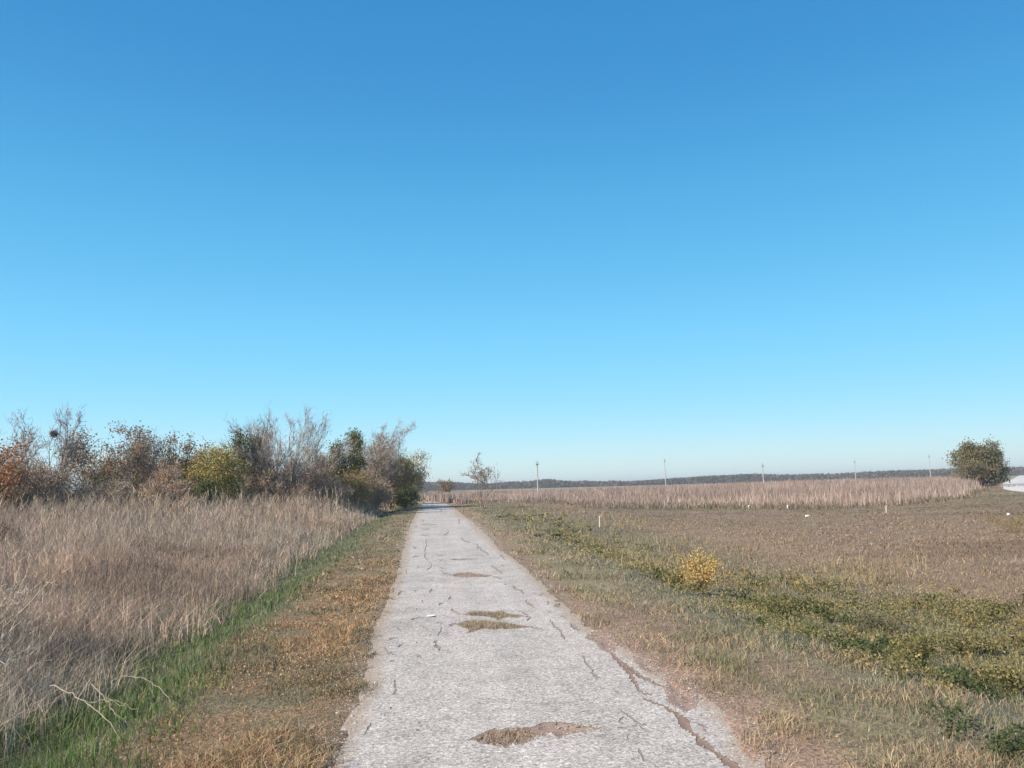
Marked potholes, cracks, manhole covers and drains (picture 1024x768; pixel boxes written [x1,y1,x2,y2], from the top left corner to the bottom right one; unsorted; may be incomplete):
crack [385,509,740,768]
crack [364,680,397,735]
pothole [461,610,526,621]
pothole [464,719,608,750]
pothole [455,619,532,634]
